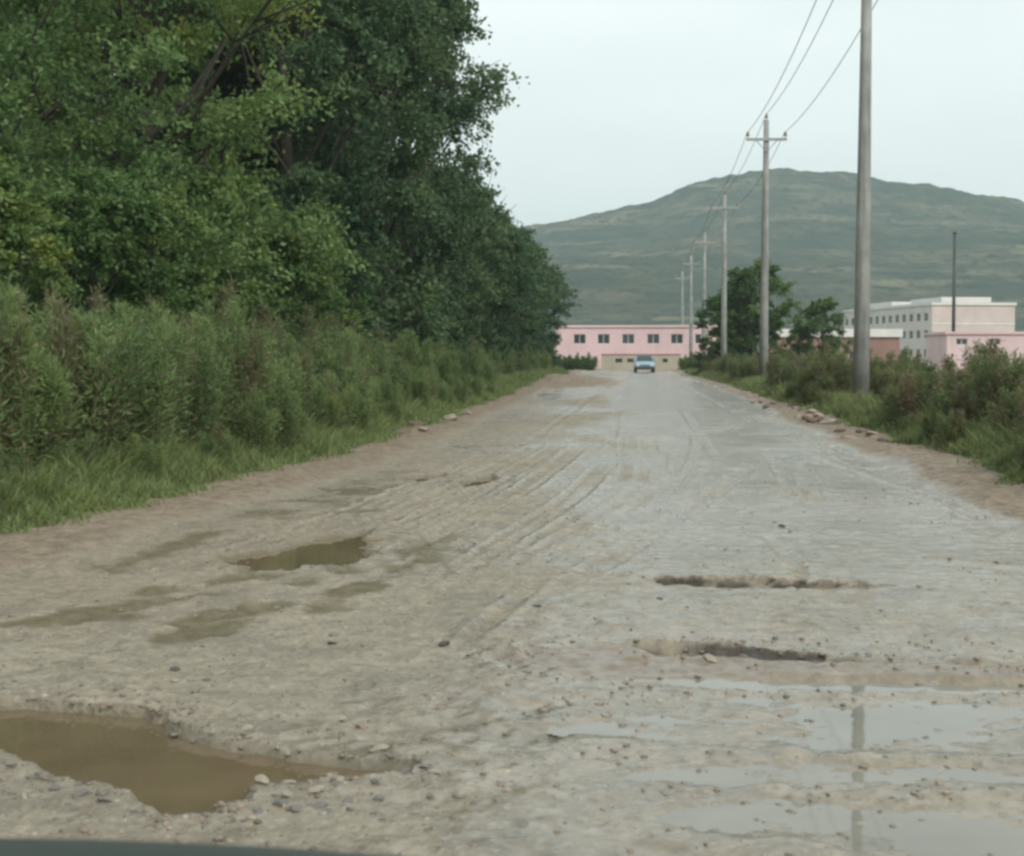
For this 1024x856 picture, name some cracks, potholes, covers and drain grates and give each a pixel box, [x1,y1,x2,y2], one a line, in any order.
pothole [644,574,897,591]
pothole [488,638,1024,697]
pothole [211,528,395,573]
pothole [0,698,423,818]
pothole [452,473,502,487]
